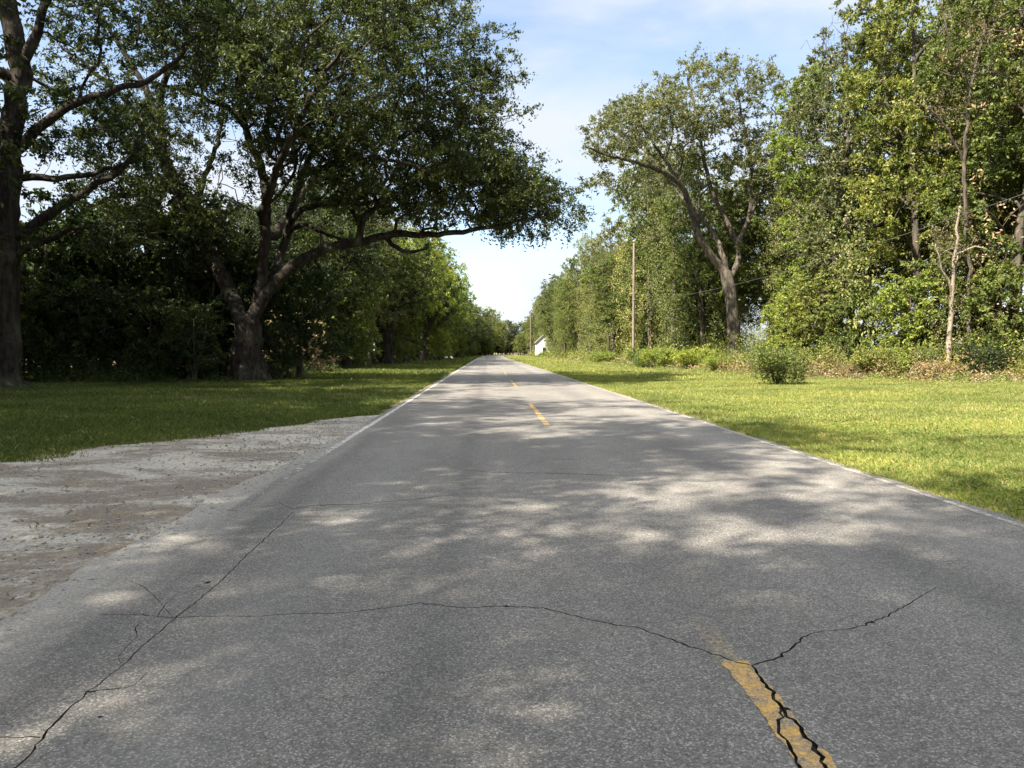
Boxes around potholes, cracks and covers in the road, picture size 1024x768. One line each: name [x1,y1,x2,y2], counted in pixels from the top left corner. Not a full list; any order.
crack [0,513,936,768]
crack [445,459,598,475]
